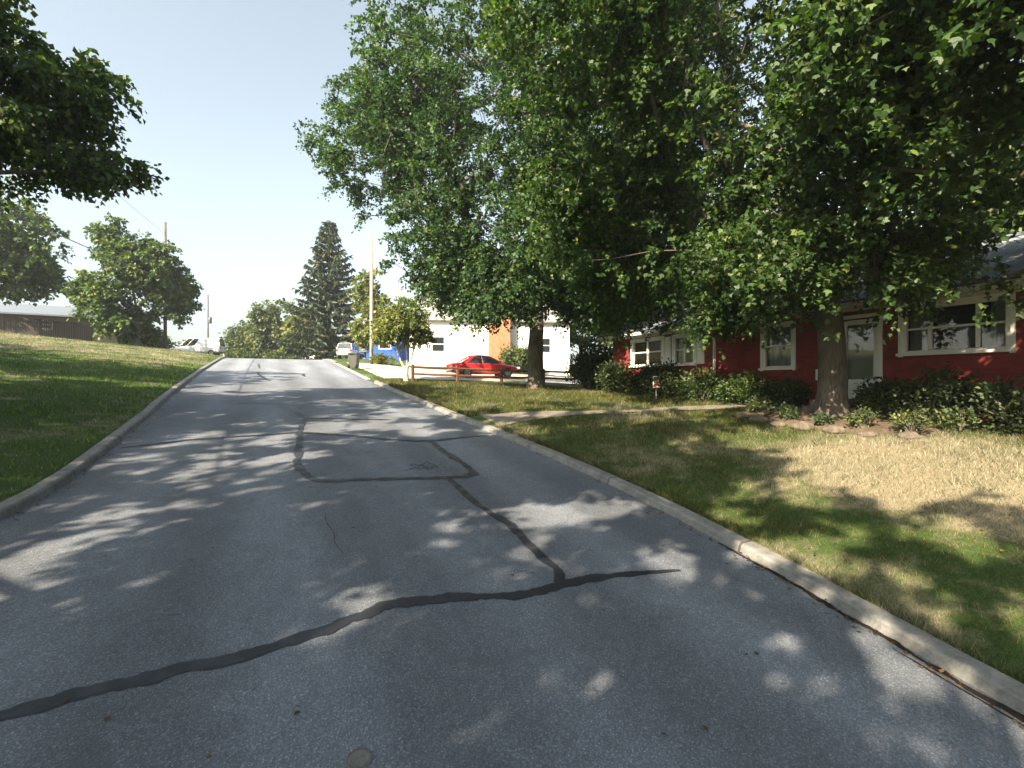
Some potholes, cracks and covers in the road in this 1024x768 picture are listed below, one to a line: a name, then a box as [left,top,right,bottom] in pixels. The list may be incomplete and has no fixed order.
utility cover [345,748,373,768]
